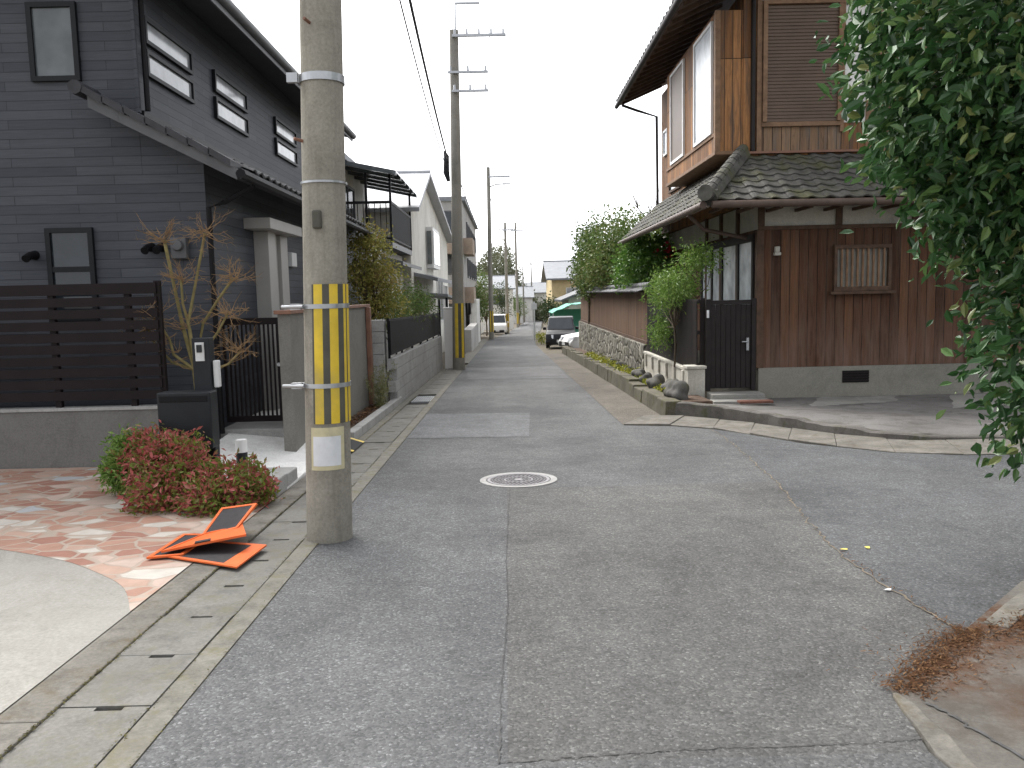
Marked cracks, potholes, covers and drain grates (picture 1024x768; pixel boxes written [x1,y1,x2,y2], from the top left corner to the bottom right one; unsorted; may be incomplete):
crack [497,491,1024,763]
manhole cover [480,472,557,488]
crack [711,429,960,630]
